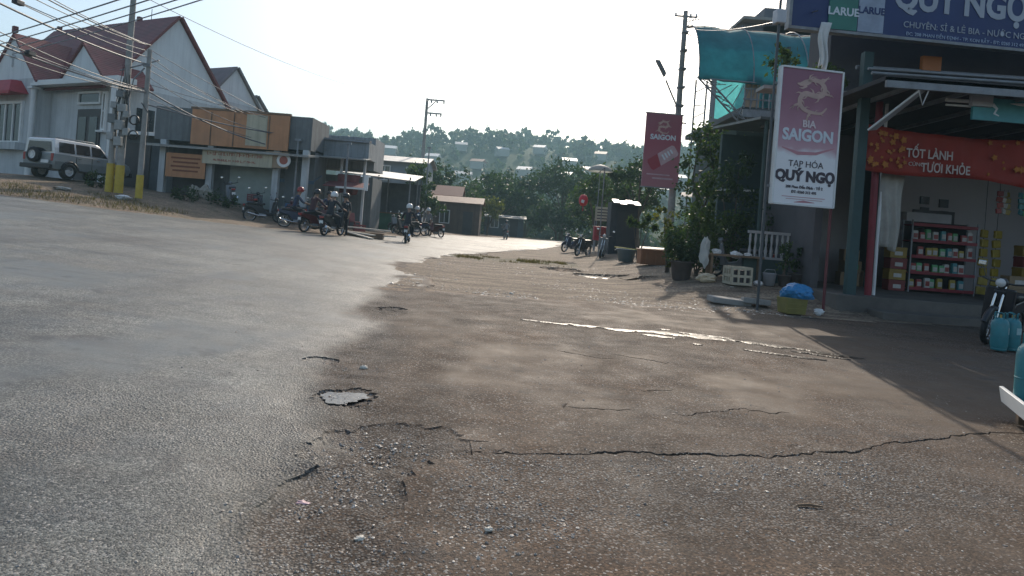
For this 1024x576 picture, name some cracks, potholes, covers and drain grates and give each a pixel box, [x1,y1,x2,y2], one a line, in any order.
pothole [290,384,395,414]
crack [470,385,1024,466]
